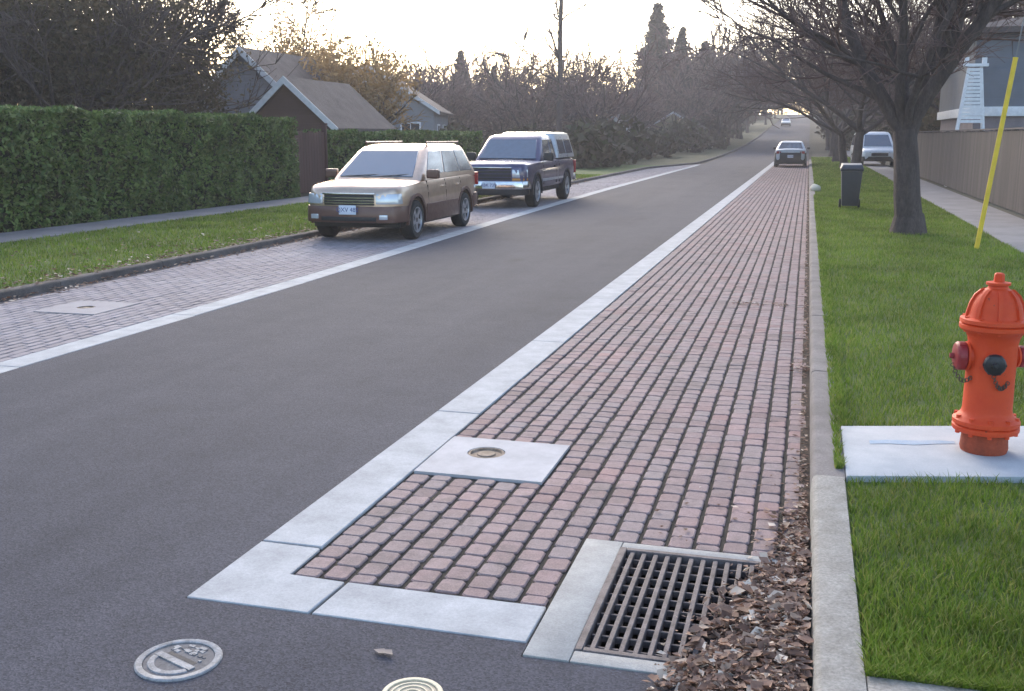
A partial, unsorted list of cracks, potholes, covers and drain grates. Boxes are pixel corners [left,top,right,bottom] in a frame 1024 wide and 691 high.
drain grate [523,538,791,676]
manhole cover [134,639,223,682]
manhole cover [382,677,443,691]
